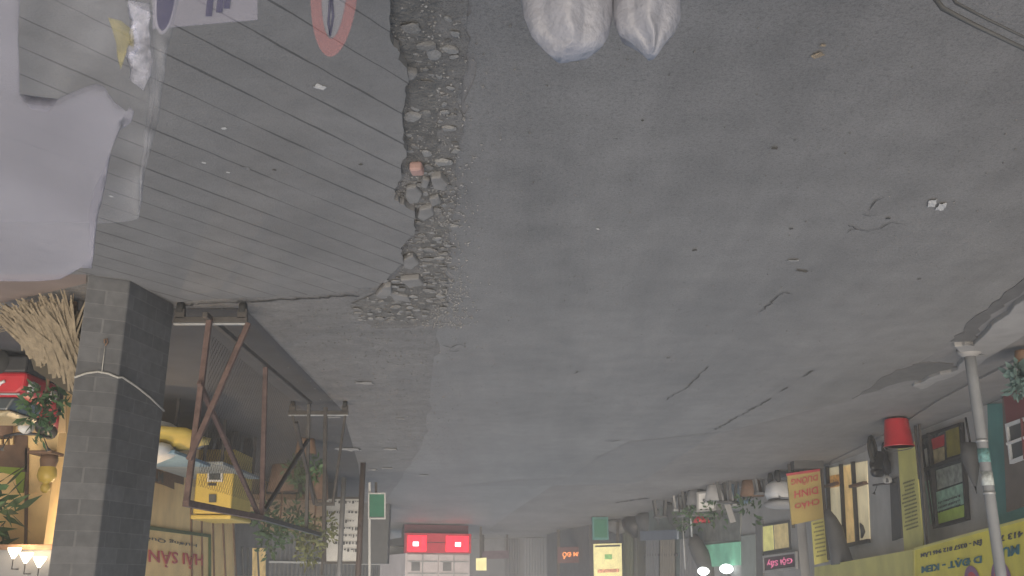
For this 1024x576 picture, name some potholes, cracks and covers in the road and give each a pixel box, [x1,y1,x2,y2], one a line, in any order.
crack [716,371,813,430]
